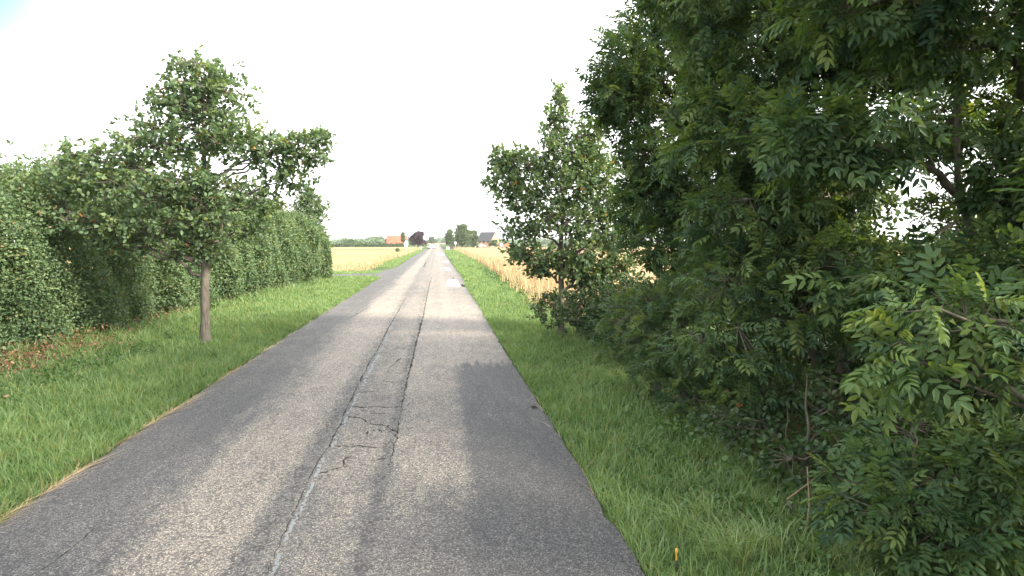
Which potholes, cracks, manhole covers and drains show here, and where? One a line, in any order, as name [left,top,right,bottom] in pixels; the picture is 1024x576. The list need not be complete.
crack [265,277,432,575]
